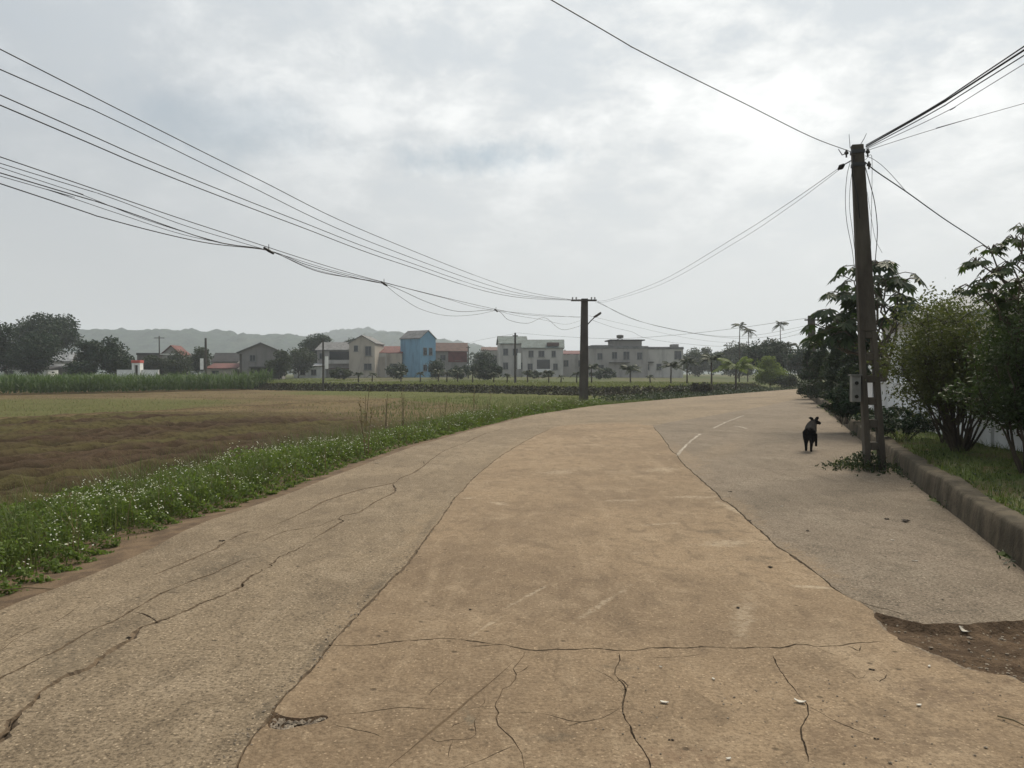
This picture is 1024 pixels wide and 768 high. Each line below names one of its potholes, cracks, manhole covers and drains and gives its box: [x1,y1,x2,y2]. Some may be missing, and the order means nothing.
pothole [268,712,328,730]
crack [326,638,887,768]
crack [0,427,508,743]
